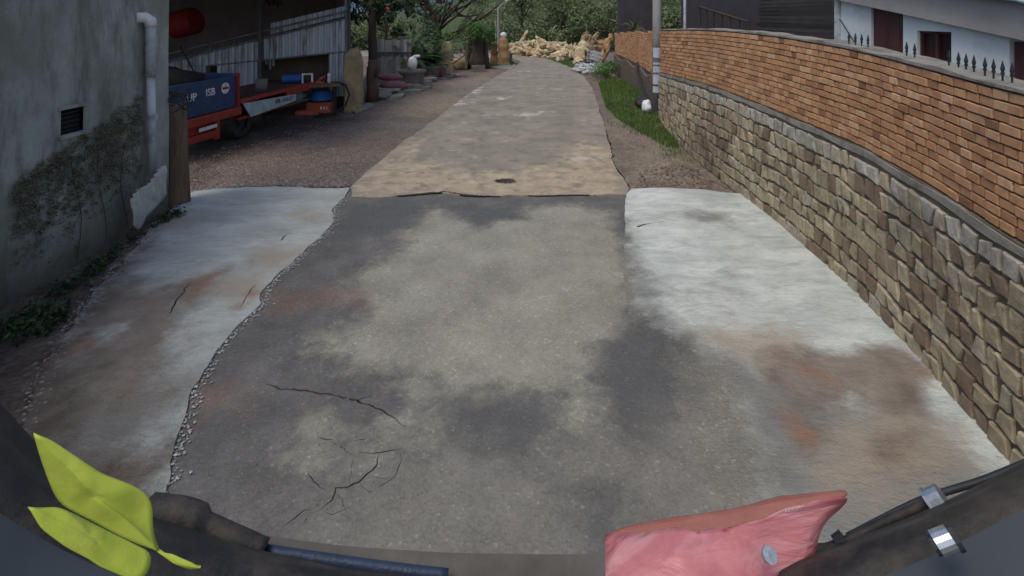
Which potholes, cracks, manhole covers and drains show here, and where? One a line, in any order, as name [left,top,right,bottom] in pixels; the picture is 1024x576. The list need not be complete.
crack [267,384,407,427]
crack [287,437,402,524]
